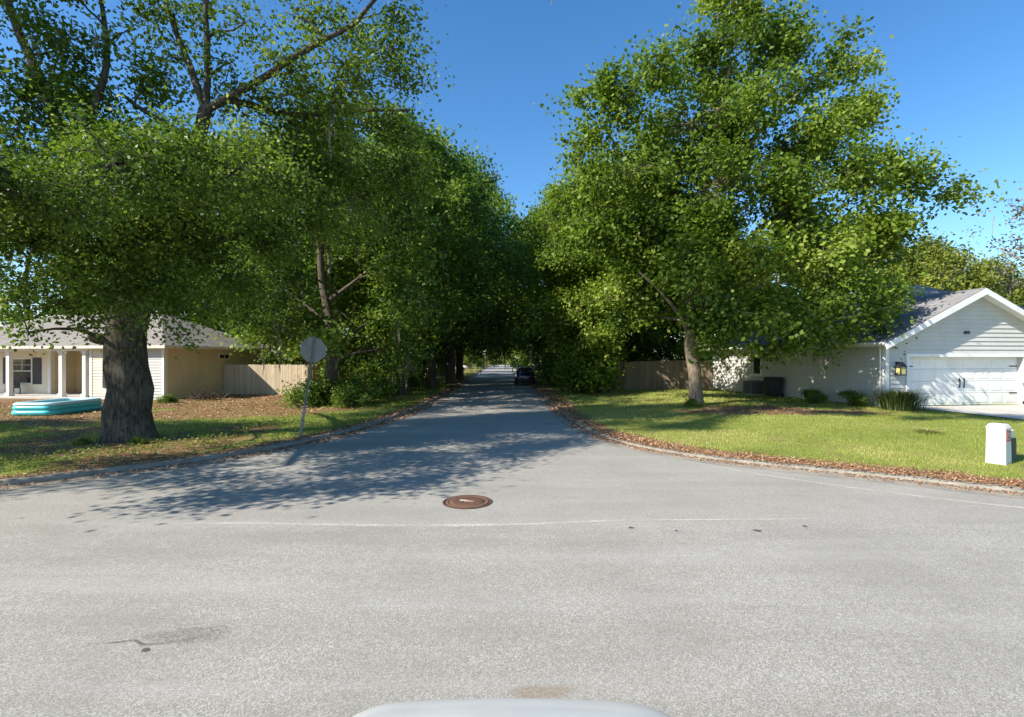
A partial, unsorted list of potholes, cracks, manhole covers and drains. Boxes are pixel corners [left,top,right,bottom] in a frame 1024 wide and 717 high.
manhole cover [442,495,493,509]
